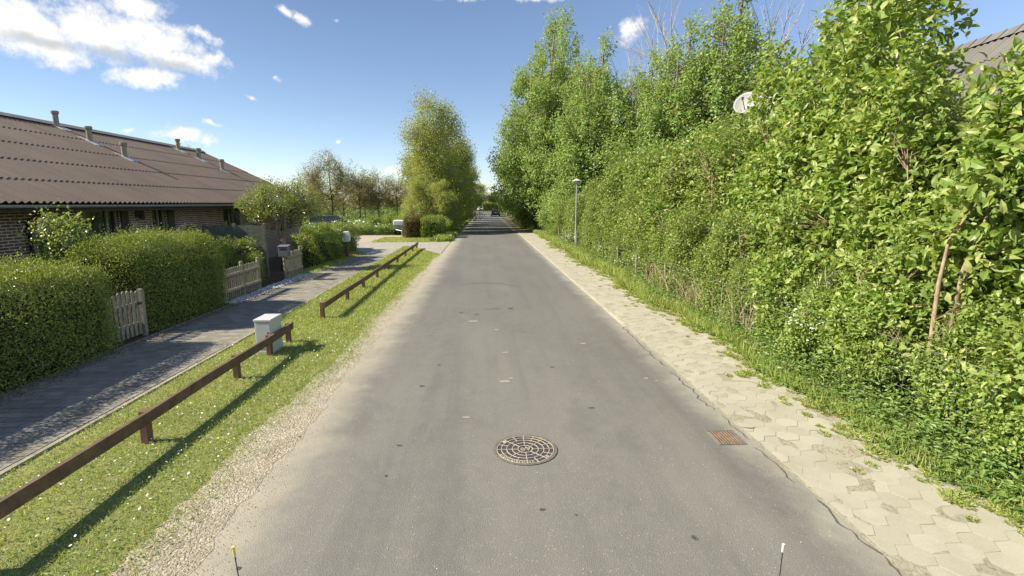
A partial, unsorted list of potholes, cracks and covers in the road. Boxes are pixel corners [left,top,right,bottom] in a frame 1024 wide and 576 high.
crack [623,327,795,483]
crack [817,499,902,576]
drain grate [706,430,747,445]
manhole cover [493,435,557,465]
